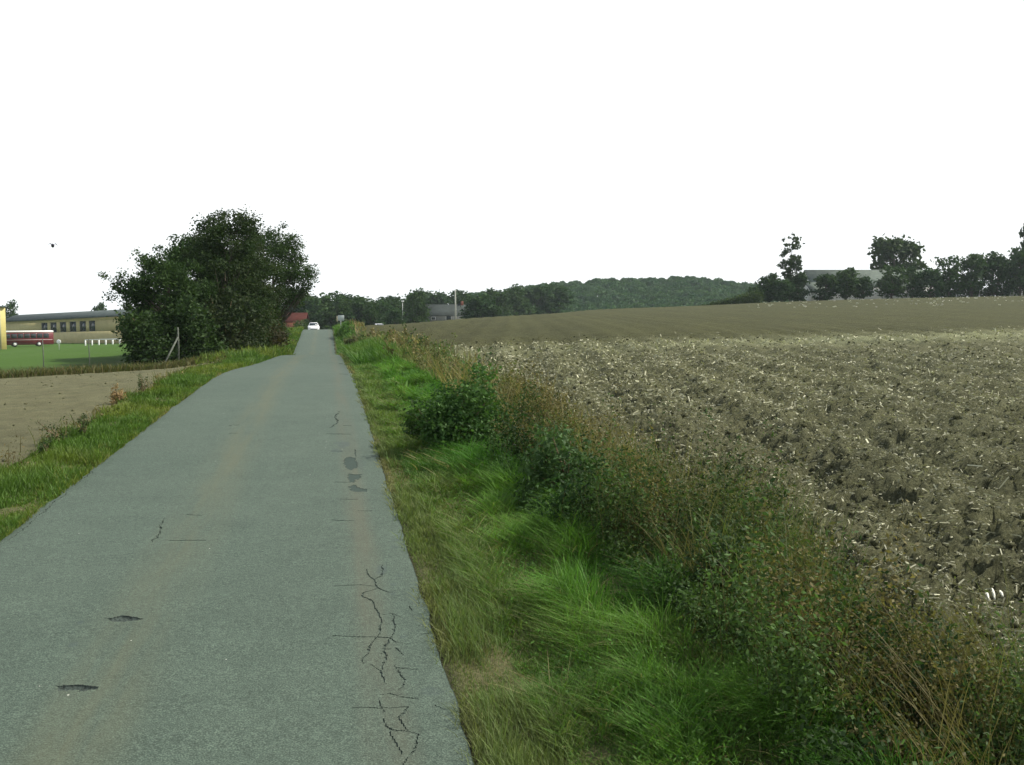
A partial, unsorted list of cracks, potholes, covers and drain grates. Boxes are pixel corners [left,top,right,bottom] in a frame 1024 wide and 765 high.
crack [152,518,205,542]
crack [332,564,420,765]
pothole [56,684,99,692]
